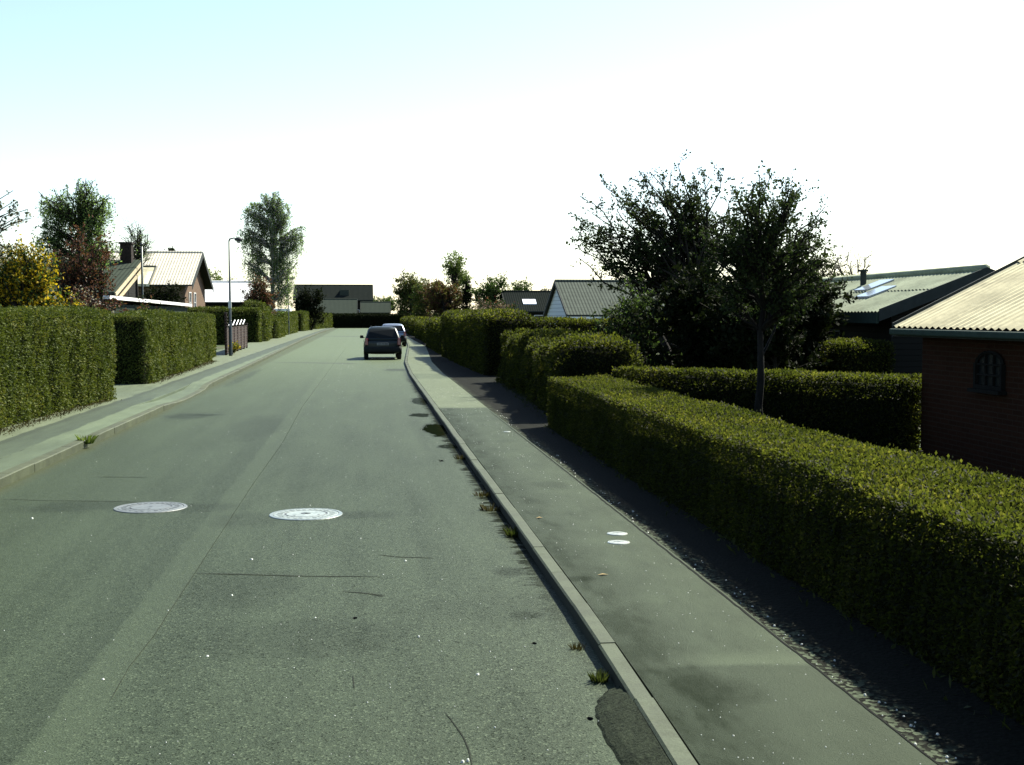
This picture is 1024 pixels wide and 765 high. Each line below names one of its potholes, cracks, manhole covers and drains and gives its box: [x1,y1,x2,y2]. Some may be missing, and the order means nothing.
manhole cover [269,508,343,521]
manhole cover [113,502,187,513]
